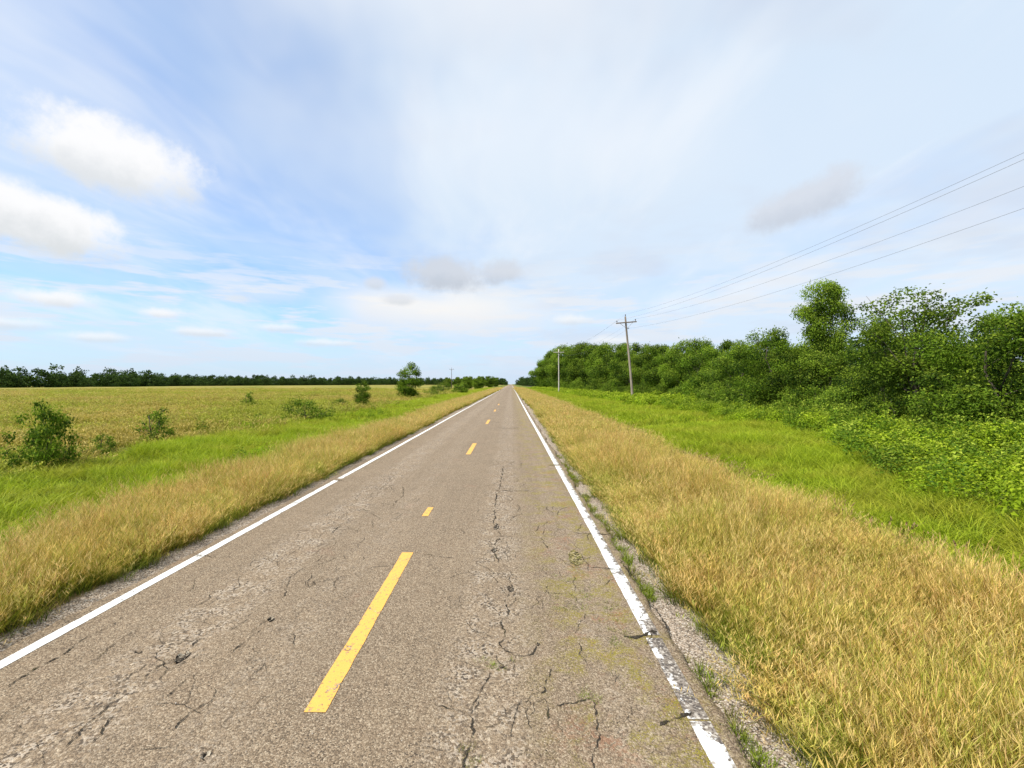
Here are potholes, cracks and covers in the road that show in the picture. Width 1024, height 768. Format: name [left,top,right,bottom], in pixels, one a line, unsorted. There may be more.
crack [624,601,669,644]
crack [429,467,636,768]
crack [0,585,277,767]
crack [238,477,416,646]
crack [659,712,694,726]
